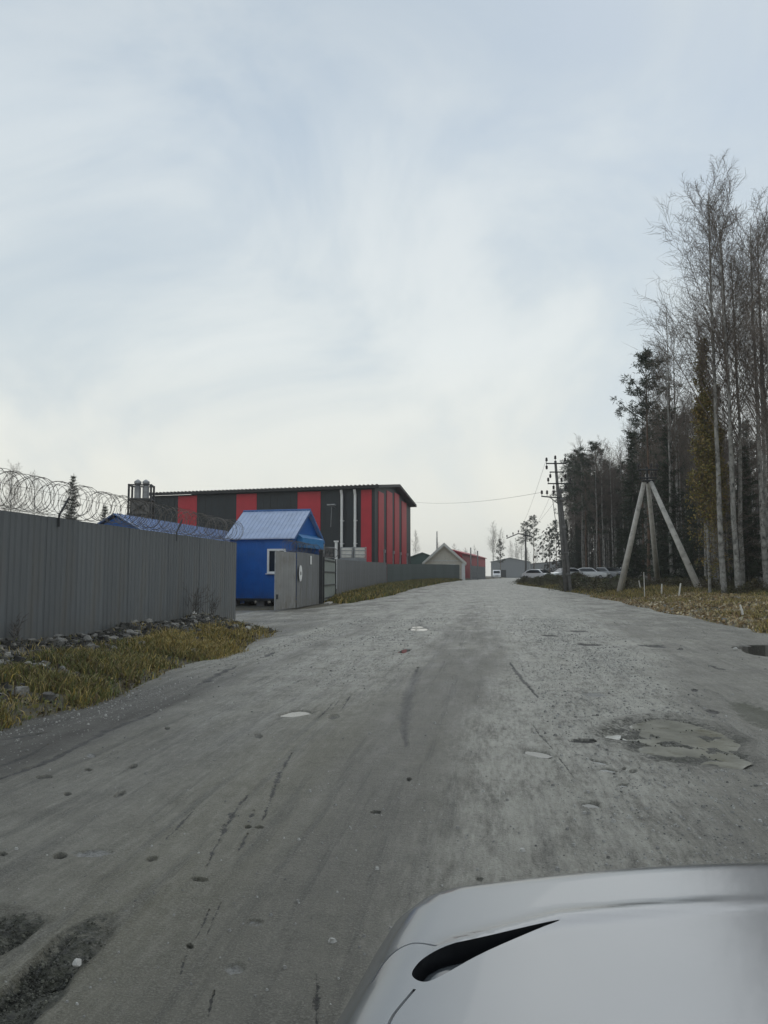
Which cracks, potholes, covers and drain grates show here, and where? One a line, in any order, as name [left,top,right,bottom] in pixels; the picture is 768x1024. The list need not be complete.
pothole [0,911,122,1024]
crack [178,902,221,978]
crack [157,753,293,867]
pothole [718,640,768,658]
pothole [584,711,768,773]
crack [509,662,539,698]
